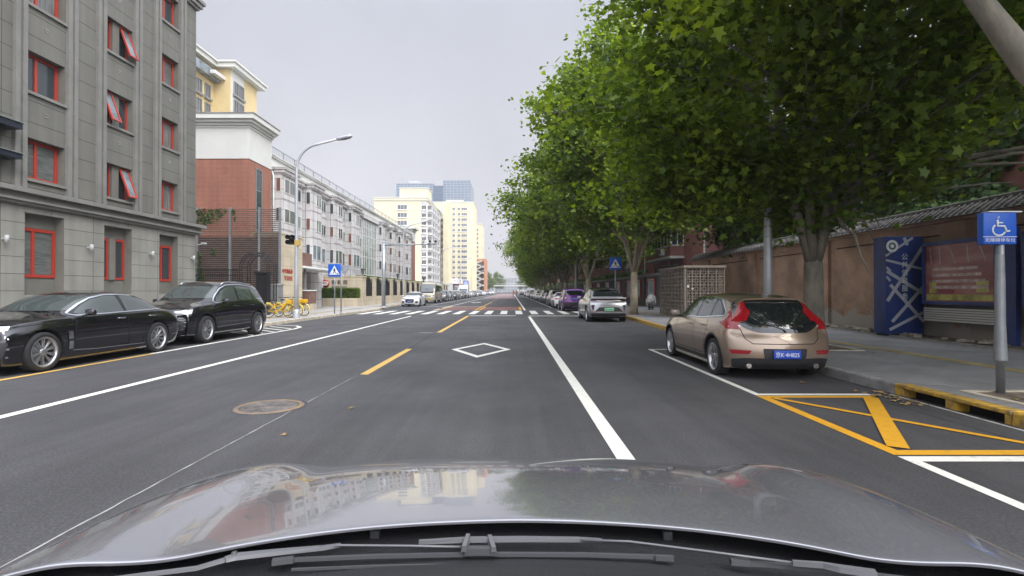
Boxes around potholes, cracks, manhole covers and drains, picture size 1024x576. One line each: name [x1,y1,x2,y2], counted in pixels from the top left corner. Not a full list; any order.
manhole cover [229,399,308,415]
